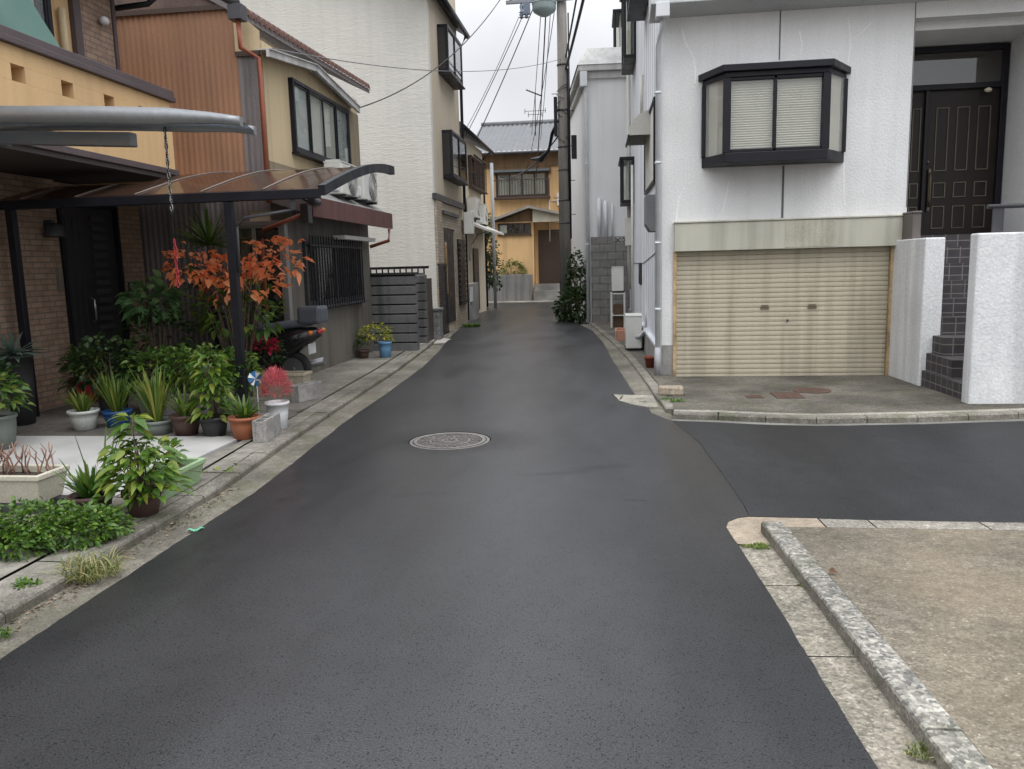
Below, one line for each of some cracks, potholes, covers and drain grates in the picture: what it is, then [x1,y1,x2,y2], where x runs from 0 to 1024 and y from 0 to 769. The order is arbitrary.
manhole cover [410,432,490,450]
